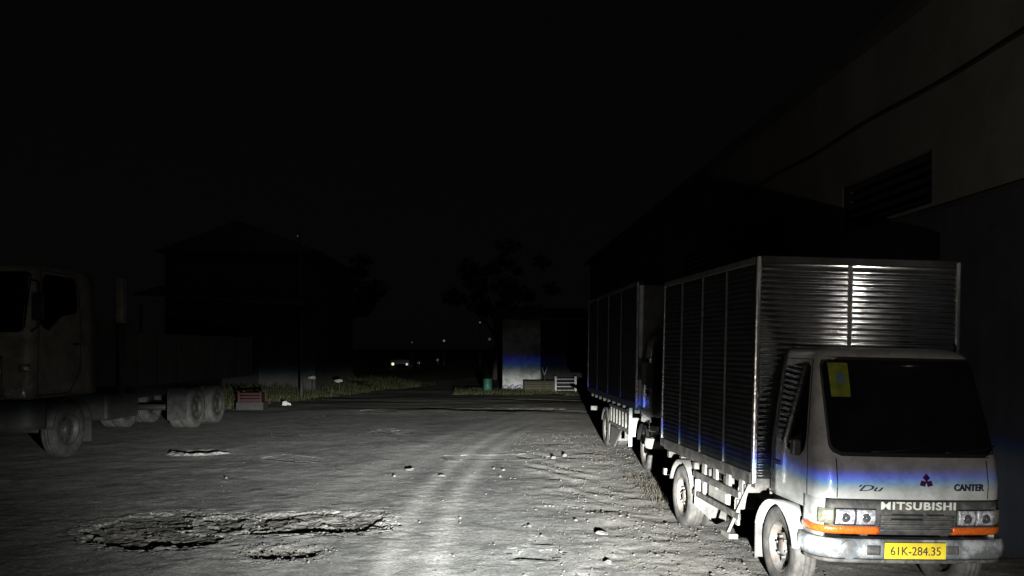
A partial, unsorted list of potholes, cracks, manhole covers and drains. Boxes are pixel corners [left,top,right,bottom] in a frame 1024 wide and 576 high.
pothole [166,448,233,457]
pothole [59,509,267,554]
pothole [177,510,404,538]
